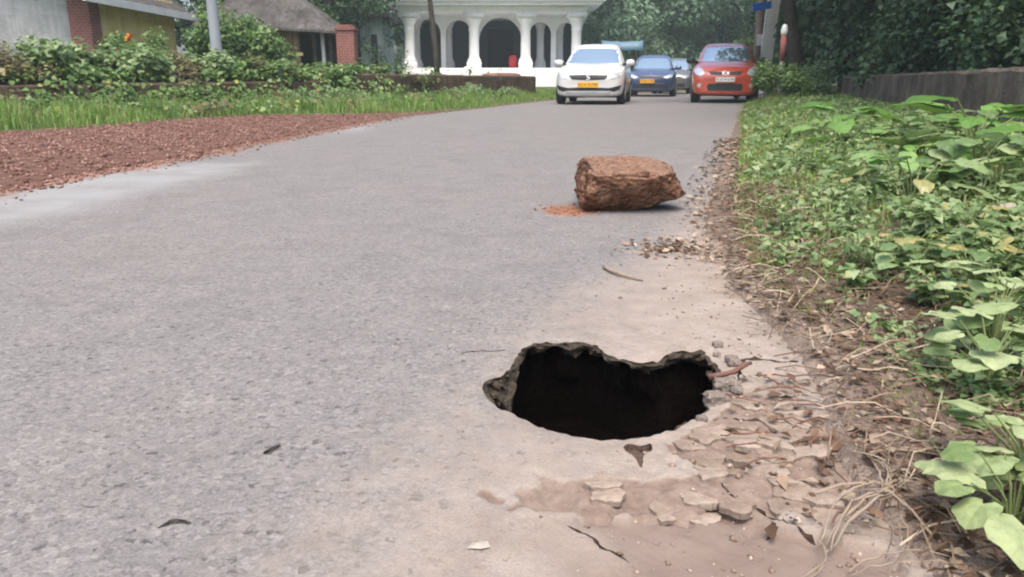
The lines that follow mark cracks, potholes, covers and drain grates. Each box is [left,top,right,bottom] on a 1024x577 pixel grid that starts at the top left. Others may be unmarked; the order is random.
crack [717,404,765,422]
crack [566,525,630,563]
crack [719,482,816,546]
pothole [482,342,721,441]
